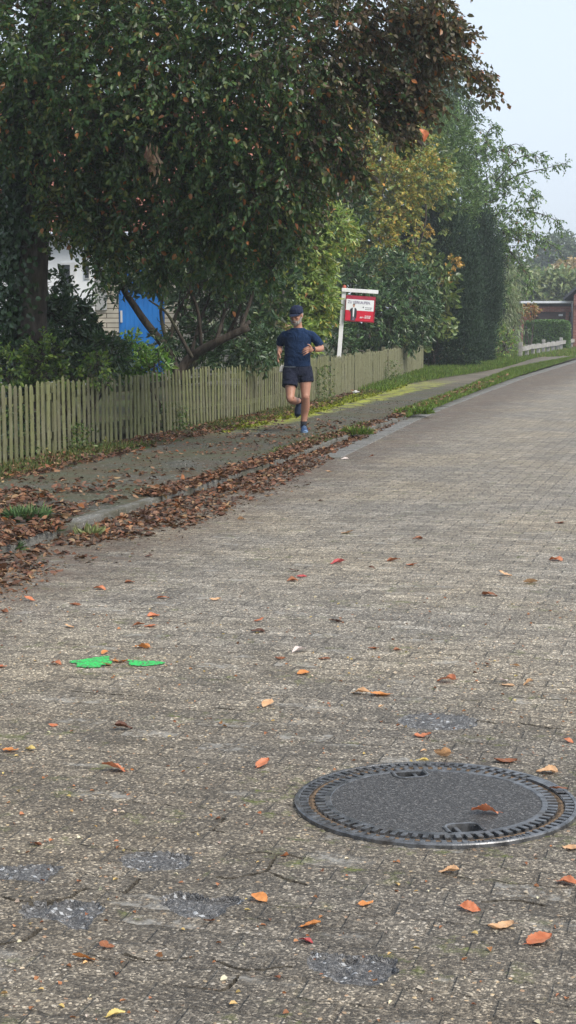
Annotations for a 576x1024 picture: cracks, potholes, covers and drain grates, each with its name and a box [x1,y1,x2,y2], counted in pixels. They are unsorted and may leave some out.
manhole cover [295,762,576,850]
crack [216,851,309,886]
